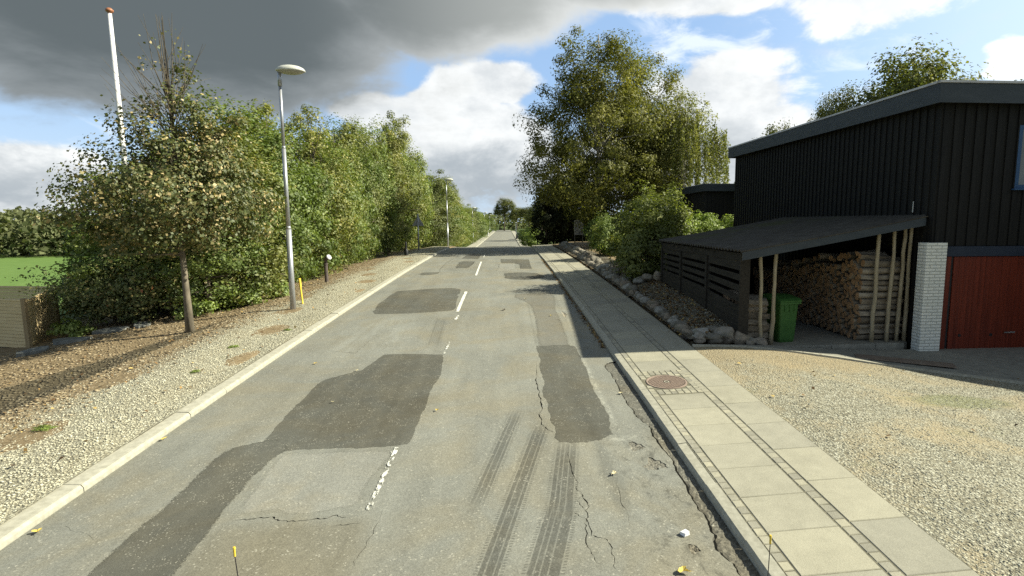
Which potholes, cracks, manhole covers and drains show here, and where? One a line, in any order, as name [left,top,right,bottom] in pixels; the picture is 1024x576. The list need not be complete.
crack [568,456,615,568]
pothole [644,457,668,470]
crack [240,515,356,527]
crack [535,367,553,432]
manhole cover [646,375,687,389]
